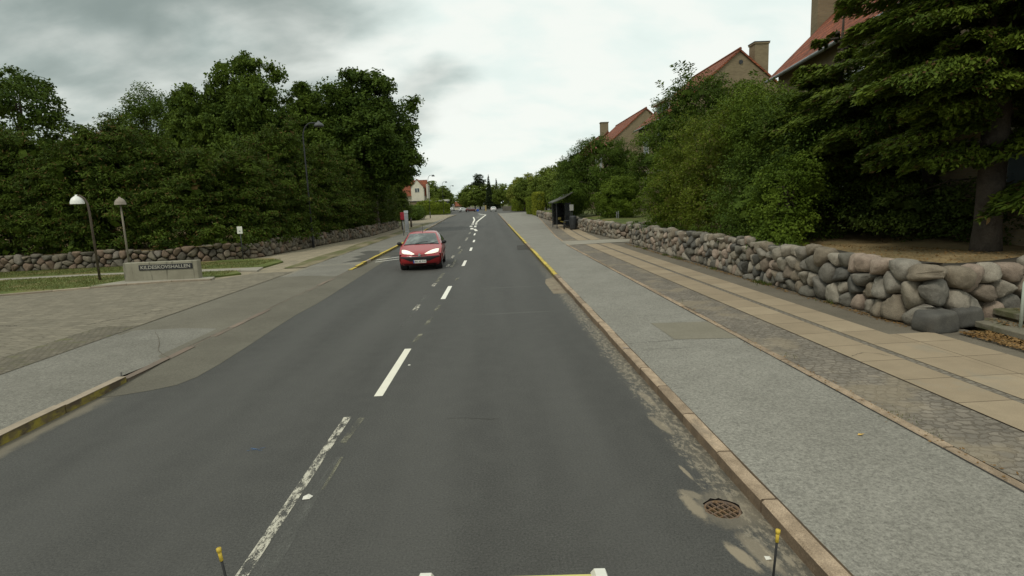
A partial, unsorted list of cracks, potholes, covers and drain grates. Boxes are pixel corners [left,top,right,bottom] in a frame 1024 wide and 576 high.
drain grate [703,498,743,519]
